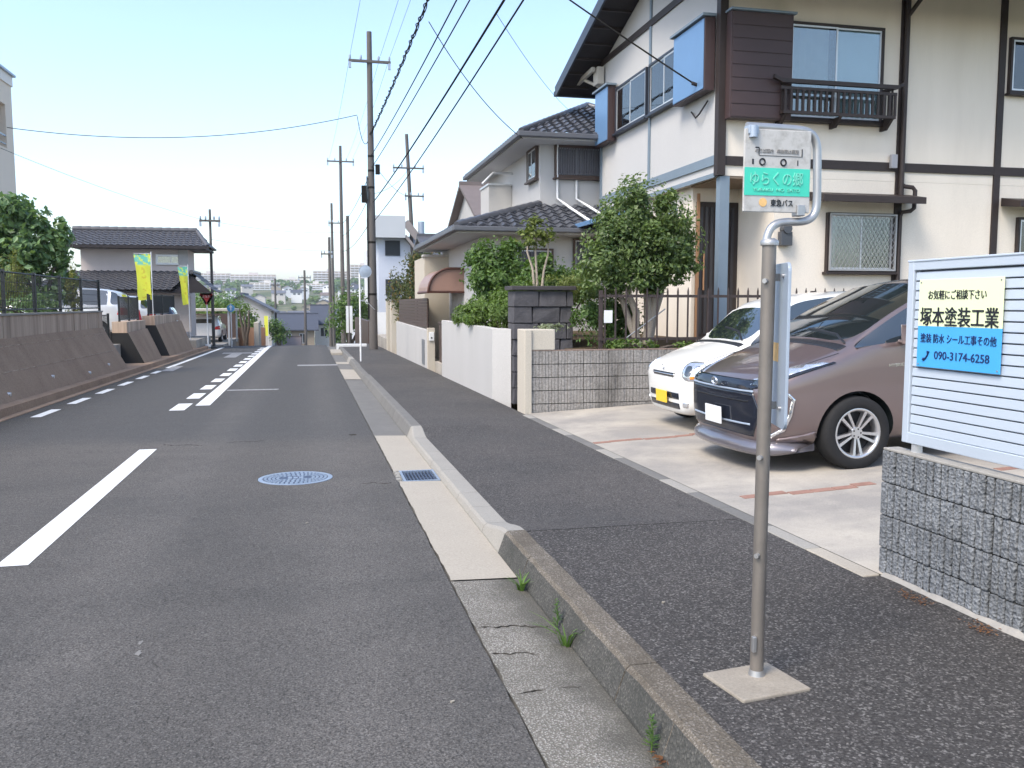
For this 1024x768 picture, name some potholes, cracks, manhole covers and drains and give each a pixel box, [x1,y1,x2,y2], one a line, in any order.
drain grate [393,469,441,483]
manhole cover [258,471,333,485]
